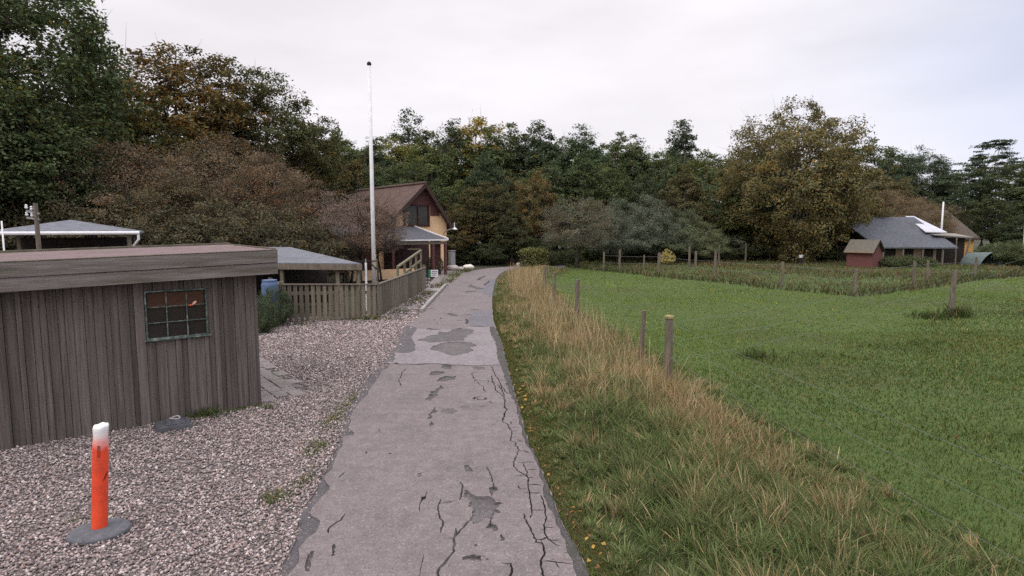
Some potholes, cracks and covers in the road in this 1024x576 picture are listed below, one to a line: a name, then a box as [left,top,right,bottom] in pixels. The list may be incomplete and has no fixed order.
crack [418,366,569,576]
